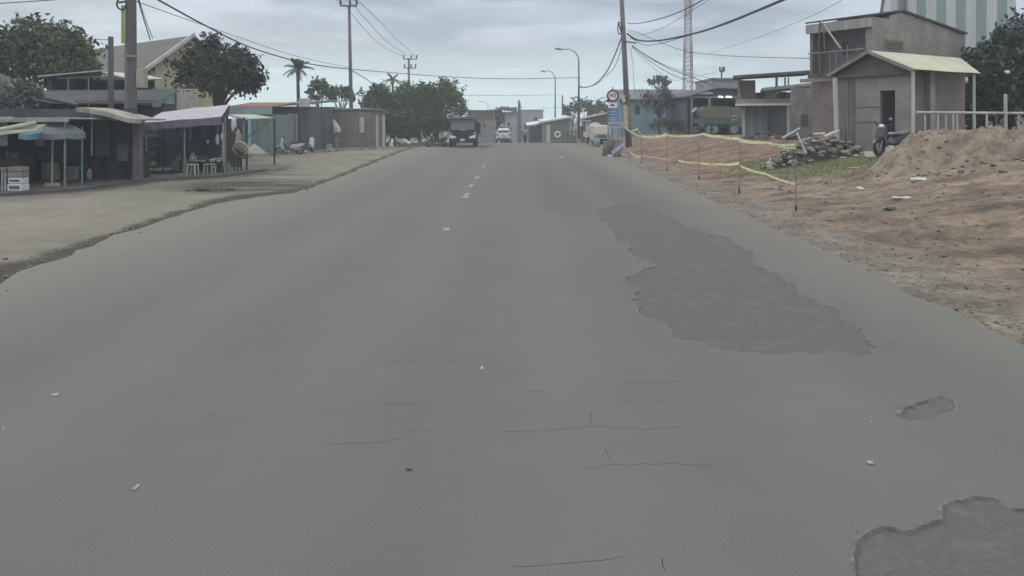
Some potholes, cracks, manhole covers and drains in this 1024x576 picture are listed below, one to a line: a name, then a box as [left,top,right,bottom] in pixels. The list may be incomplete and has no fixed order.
pothole [894,395,961,421]
crack [514,555,626,567]
